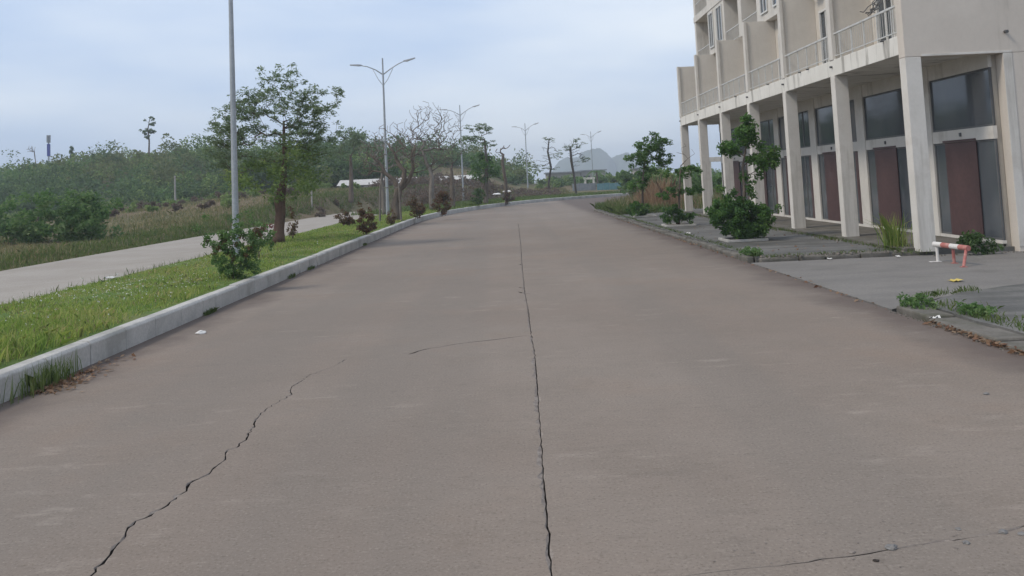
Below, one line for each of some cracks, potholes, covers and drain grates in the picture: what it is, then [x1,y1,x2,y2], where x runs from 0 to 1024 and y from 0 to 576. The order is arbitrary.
crack [410,224,554,576]
crack [687,525,1024,576]
crack [90,359,346,576]
